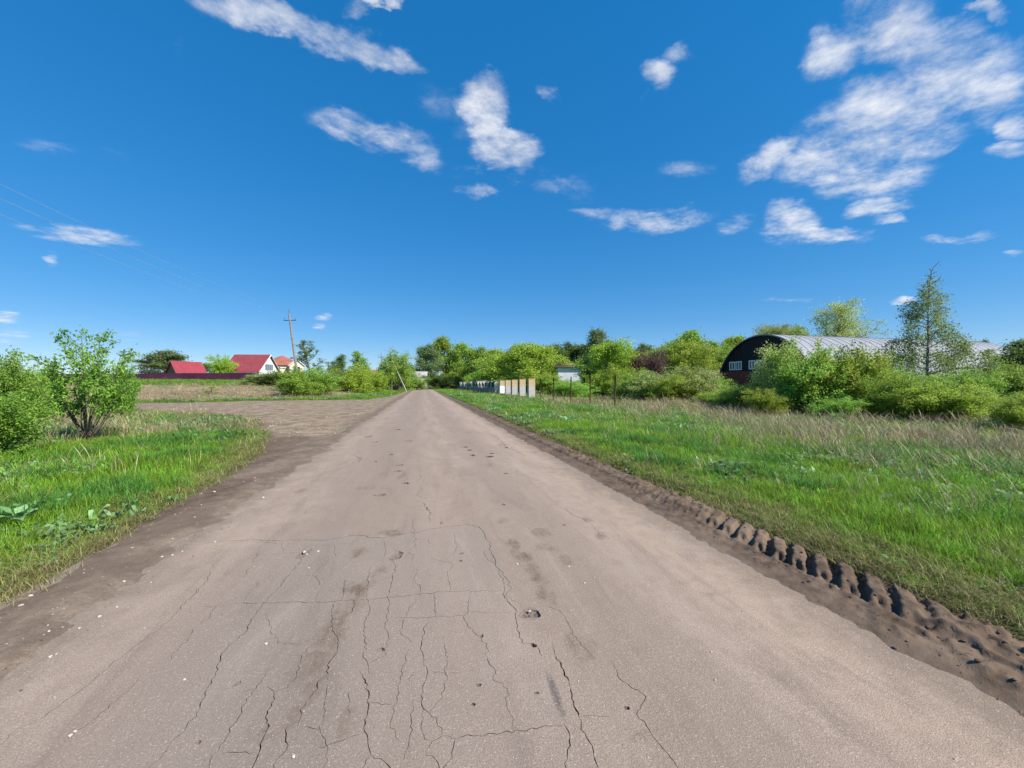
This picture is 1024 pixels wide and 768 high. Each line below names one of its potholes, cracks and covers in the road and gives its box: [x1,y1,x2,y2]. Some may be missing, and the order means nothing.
pothole [520,609,541,619]
crack [149,519,608,768]
crack [611,661,676,765]
